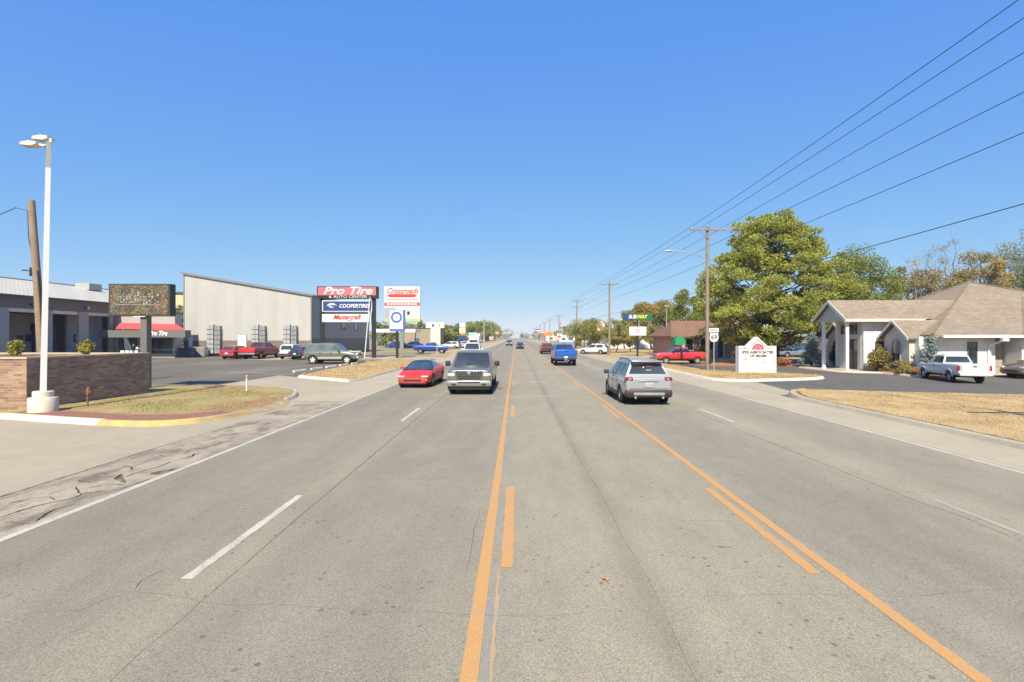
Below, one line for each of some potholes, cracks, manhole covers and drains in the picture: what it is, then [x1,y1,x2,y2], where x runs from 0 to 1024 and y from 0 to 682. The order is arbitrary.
crack [1,409,327,524]
